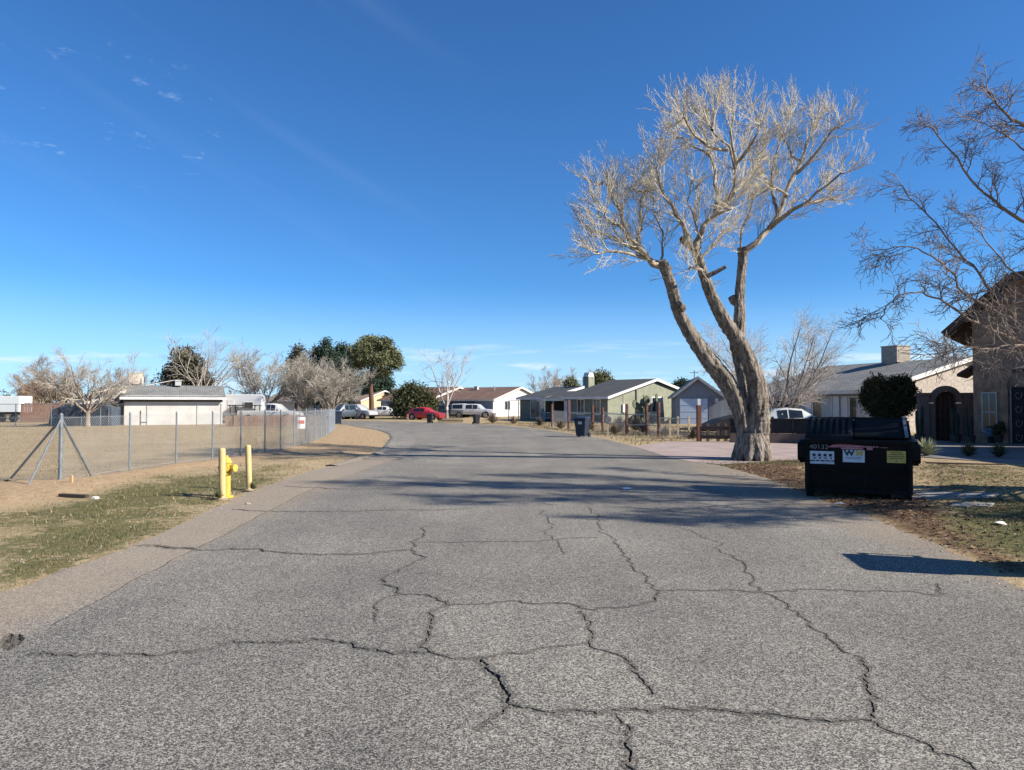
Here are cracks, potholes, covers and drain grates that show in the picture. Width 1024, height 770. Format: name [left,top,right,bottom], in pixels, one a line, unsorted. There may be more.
pothole [0,633,25,651]
crack [29,508,977,770]
